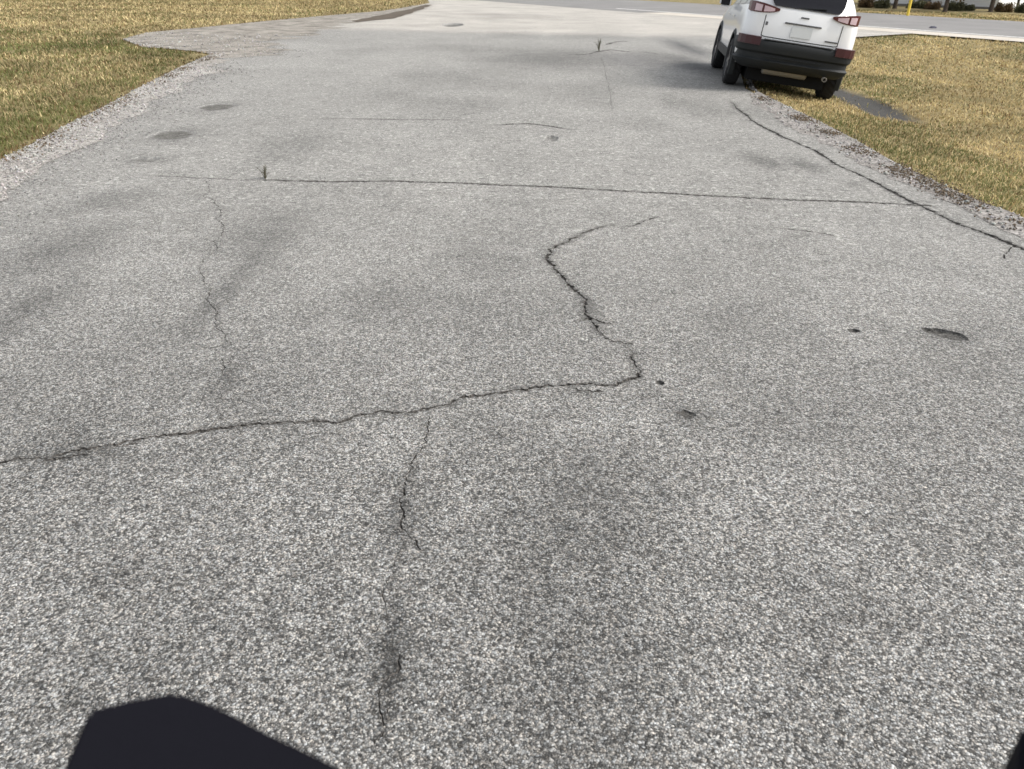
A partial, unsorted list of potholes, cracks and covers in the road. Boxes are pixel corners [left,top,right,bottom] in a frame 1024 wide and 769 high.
pothole [921,328,969,341]
crack [575,41,657,106]
crack [0,217,657,750]
crack [174,102,1024,259]
